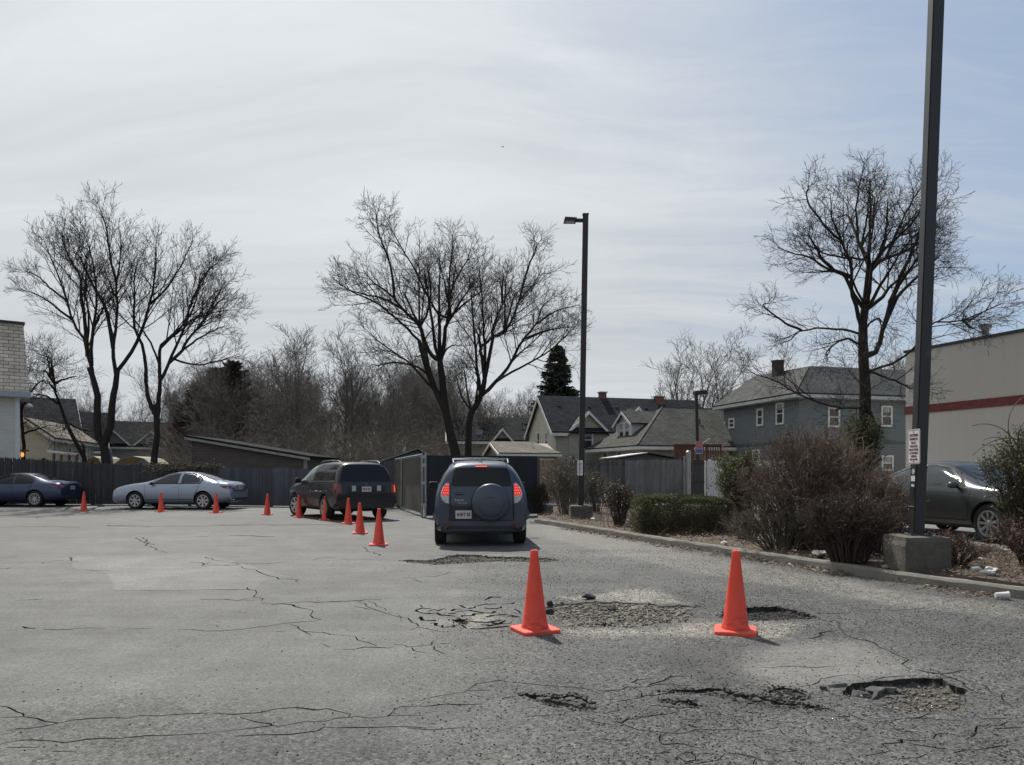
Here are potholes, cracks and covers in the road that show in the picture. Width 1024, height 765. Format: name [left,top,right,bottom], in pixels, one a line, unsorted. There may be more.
pothole [545,602,696,628]
pothole [523,694,591,708]
crack [22,557,521,654]
crack [764,602,1024,760]
pothole [721,607,813,620]
pothole [667,688,825,709]
pothole [402,555,557,565]
pothole [842,677,968,714]
crack [0,676,797,765]
